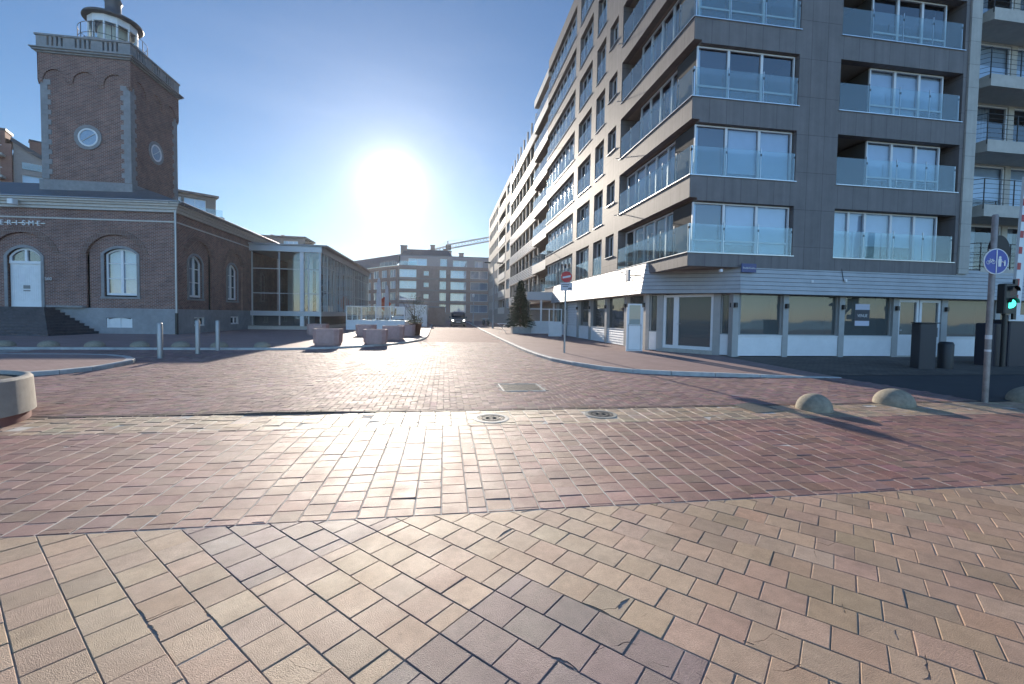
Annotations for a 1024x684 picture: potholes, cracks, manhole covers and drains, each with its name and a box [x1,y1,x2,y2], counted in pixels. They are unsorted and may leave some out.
manhole cover [498,383,546,392]
manhole cover [584,410,618,419]
manhole cover [473,413,509,423]
